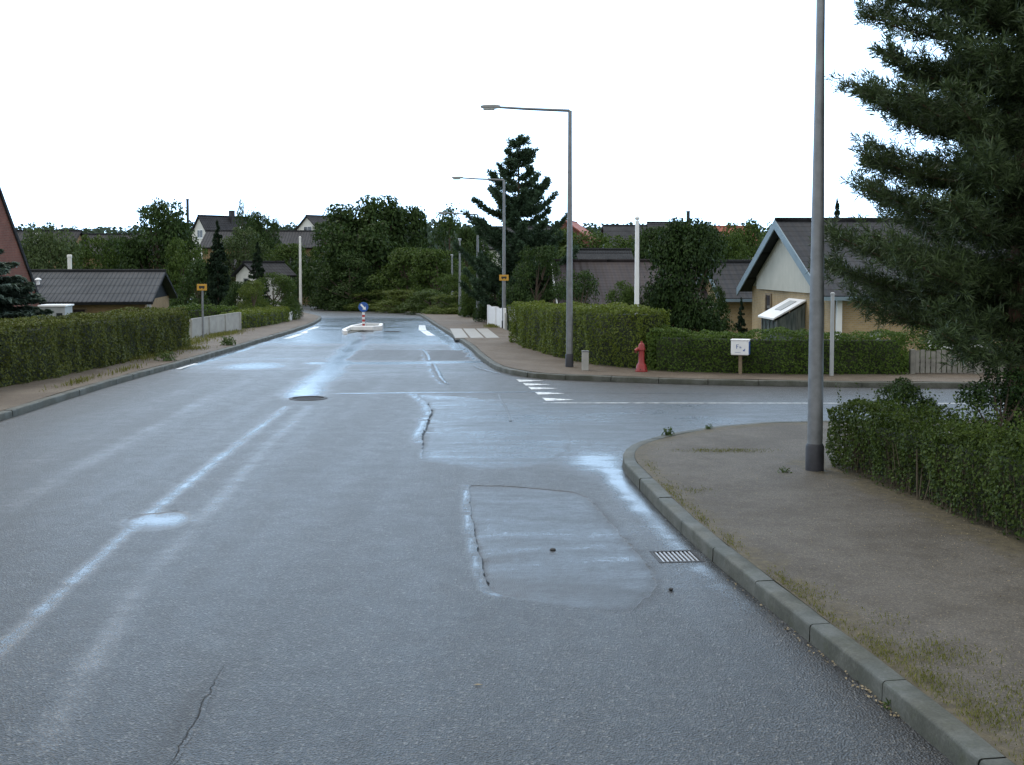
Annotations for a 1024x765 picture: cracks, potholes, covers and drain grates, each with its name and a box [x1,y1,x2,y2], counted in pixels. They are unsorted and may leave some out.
drain grate [649,550,705,563]
crack [165,664,226,765]
crack [420,349,449,384]
